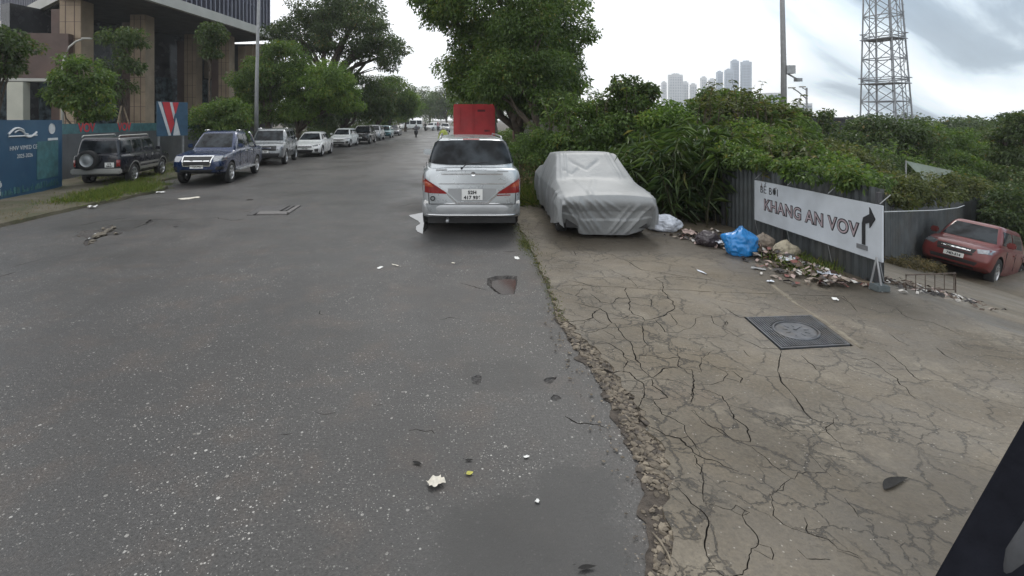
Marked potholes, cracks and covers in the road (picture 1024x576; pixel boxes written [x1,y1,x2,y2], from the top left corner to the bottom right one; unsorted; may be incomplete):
crack [564,261,865,576]
manhole cover [247,205,301,216]
pothole [487,275,518,295]
pothole [76,225,123,246]
crack [857,334,921,396]
manhole cover [746,315,850,350]
